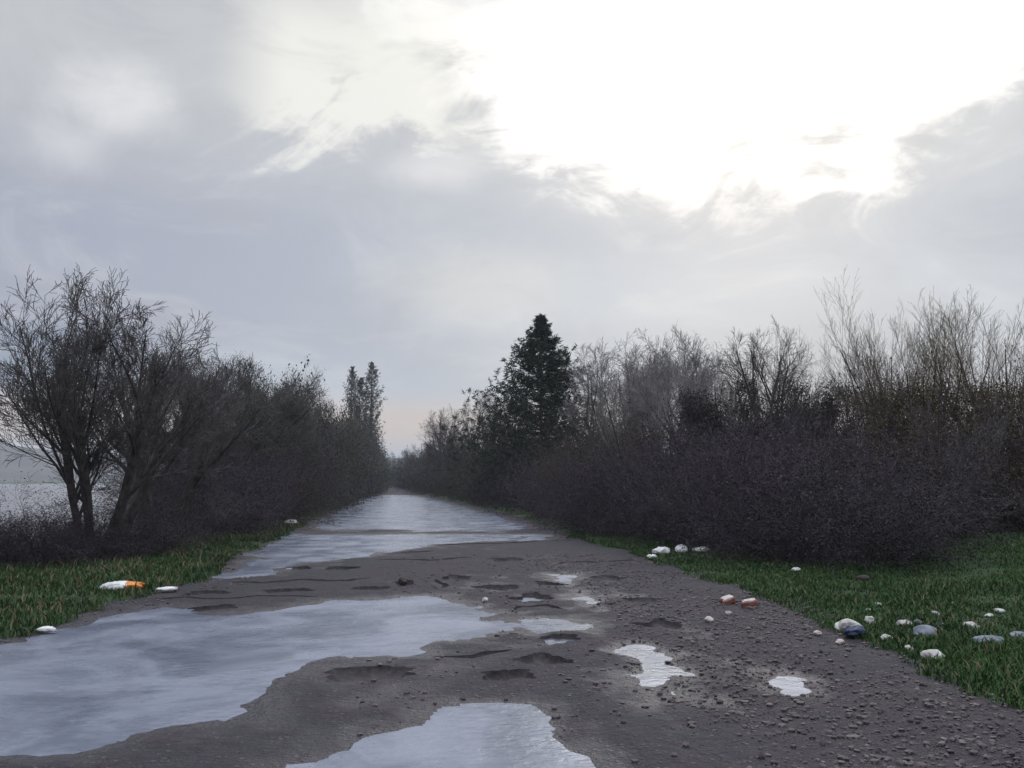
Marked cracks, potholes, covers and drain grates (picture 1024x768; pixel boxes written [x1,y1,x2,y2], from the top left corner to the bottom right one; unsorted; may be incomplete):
pothole [538,633,582,645]
pothole [481,669,536,681]
pothole [322,665,417,683]
pothole [512,652,574,666]
pothole [630,618,683,630]
